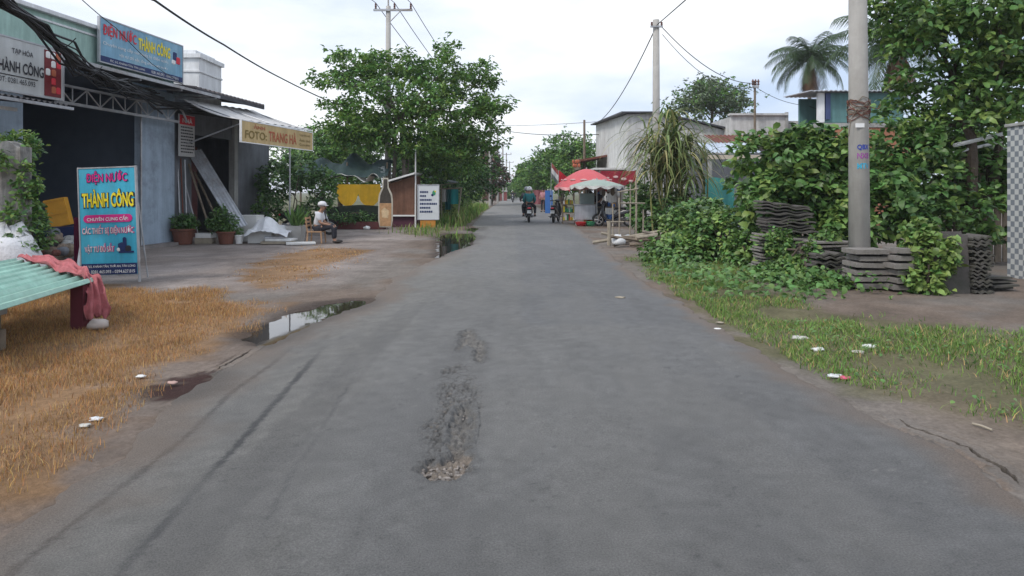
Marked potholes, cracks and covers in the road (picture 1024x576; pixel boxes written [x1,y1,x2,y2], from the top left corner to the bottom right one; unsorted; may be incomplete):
pothole [404,400,486,484]
crack [880,414,1024,493]
pothole [451,328,494,366]
crack [195,346,265,378]
